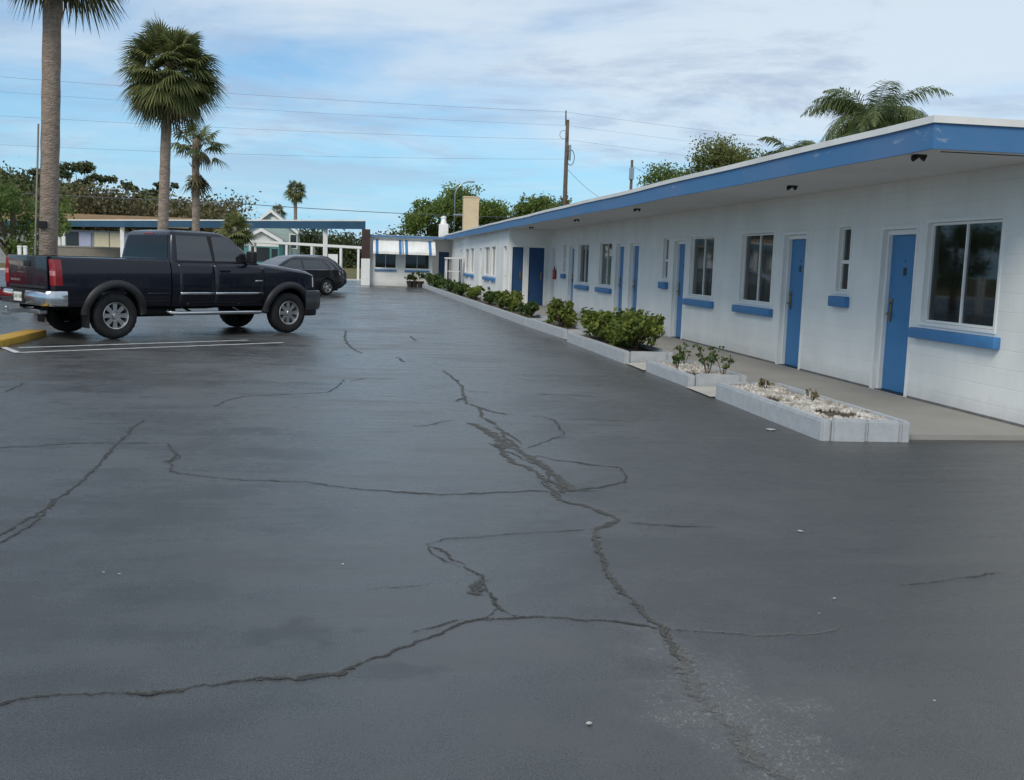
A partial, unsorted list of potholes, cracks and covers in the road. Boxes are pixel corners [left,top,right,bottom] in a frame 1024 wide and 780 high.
crack [0,370,853,779]
crack [895,572,1000,586]
